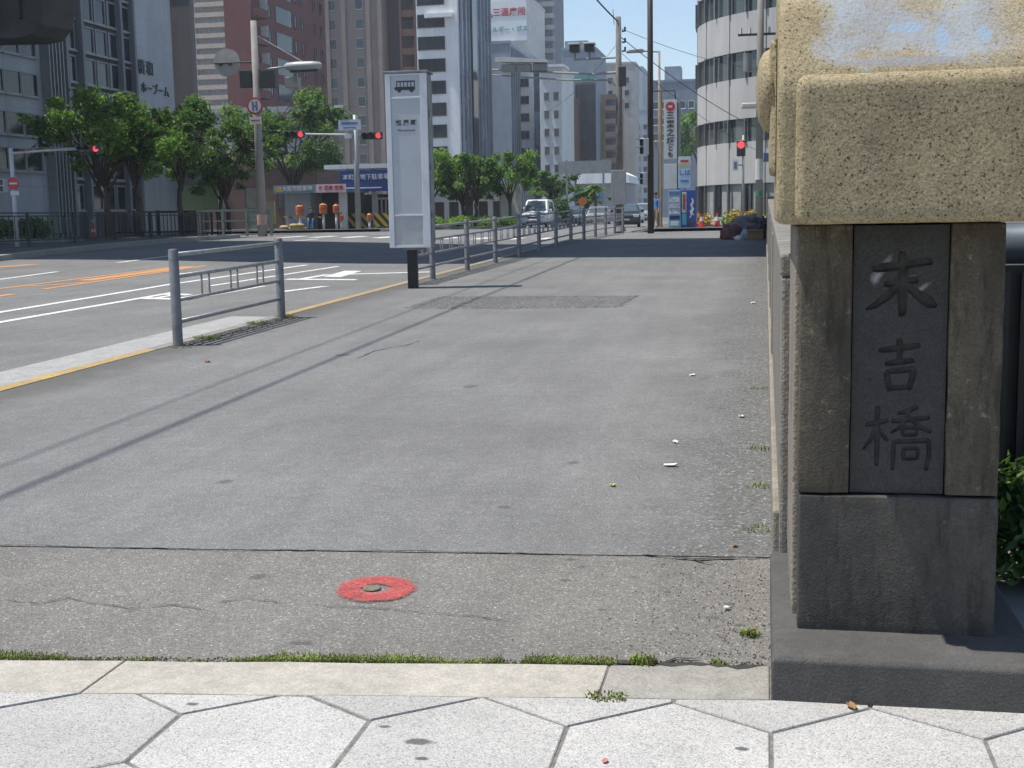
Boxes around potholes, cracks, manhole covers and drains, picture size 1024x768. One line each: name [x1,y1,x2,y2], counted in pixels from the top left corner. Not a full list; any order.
crack [5,597,201,616]
